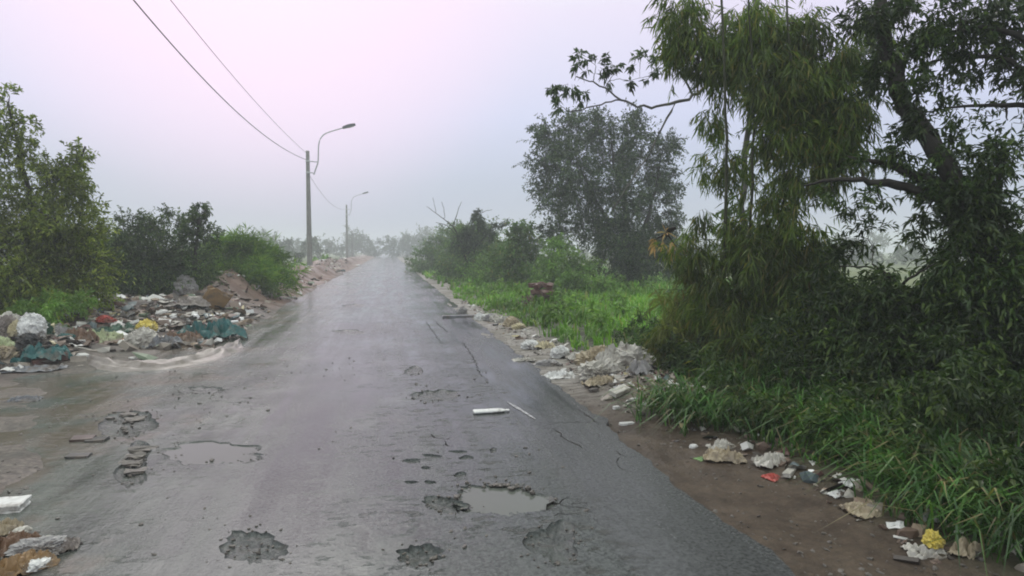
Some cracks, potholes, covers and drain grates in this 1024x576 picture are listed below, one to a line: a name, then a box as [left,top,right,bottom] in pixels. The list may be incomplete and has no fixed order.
pothole [219,524,298,572]
pothole [401,389,460,403]
pothole [396,540,445,571]
pothole [422,495,484,514]
pothole [157,441,263,466]
pothole [95,409,162,443]
pothole [404,365,423,375]
crack [425,320,482,376]
crack [554,406,599,448]
